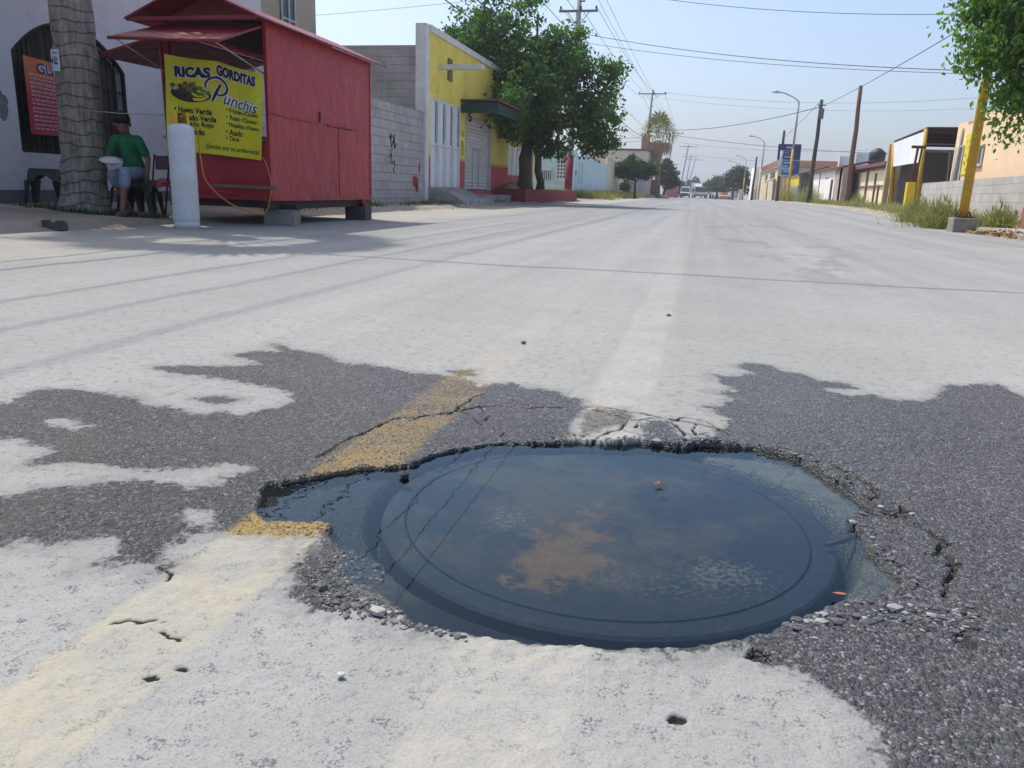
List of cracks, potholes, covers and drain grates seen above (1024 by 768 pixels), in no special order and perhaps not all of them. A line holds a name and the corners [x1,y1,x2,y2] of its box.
crack [583,405,735,441]
crack [310,393,565,460]
manhole cover [380,452,838,650]
crack [782,447,972,602]
